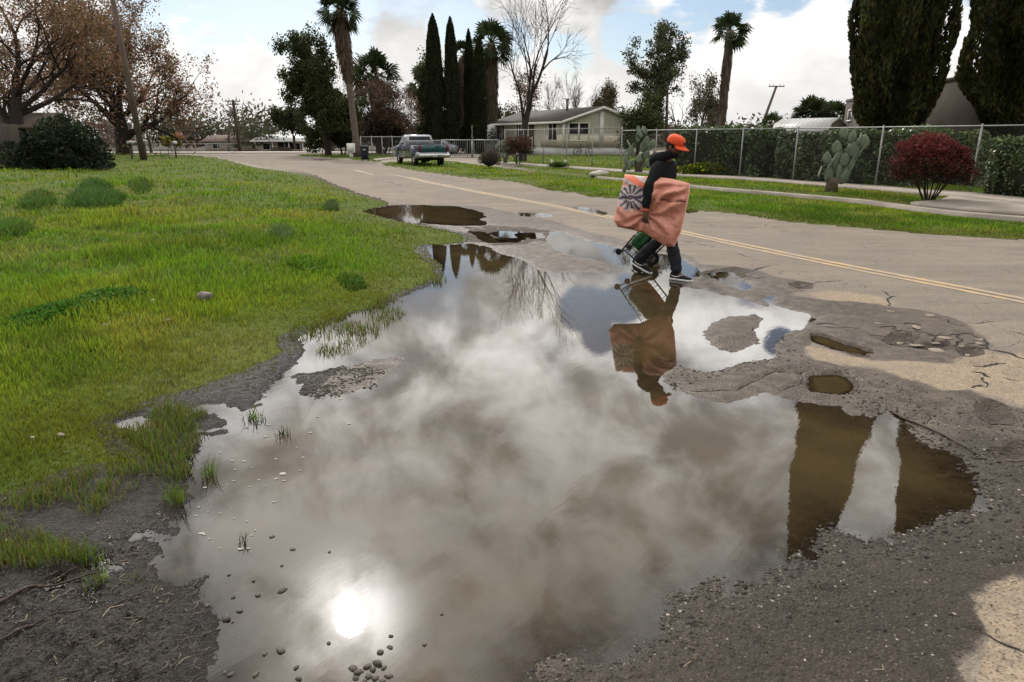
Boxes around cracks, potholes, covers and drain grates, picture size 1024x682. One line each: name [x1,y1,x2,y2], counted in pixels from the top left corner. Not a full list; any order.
pothole [955,345,985,357]
crack [869,292,1024,388]
pothole [921,341,955,350]
pothole [882,332,921,345]
pothole [802,370,860,395]
pothole [698,266,750,280]
pothole [809,332,873,356]
pothole [465,225,551,245]
